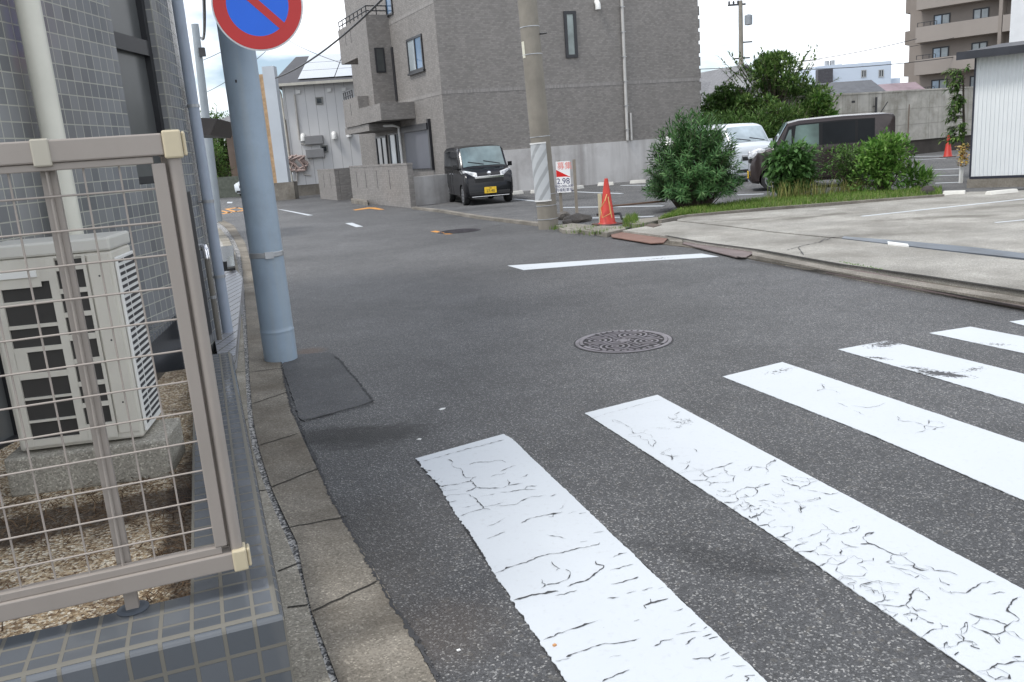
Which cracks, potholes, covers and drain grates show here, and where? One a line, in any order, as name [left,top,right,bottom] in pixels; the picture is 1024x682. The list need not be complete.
crack [597,401,1021,680]
manhole cover [574,330,674,354]
crack [425,440,586,539]
crack [502,531,749,682]
